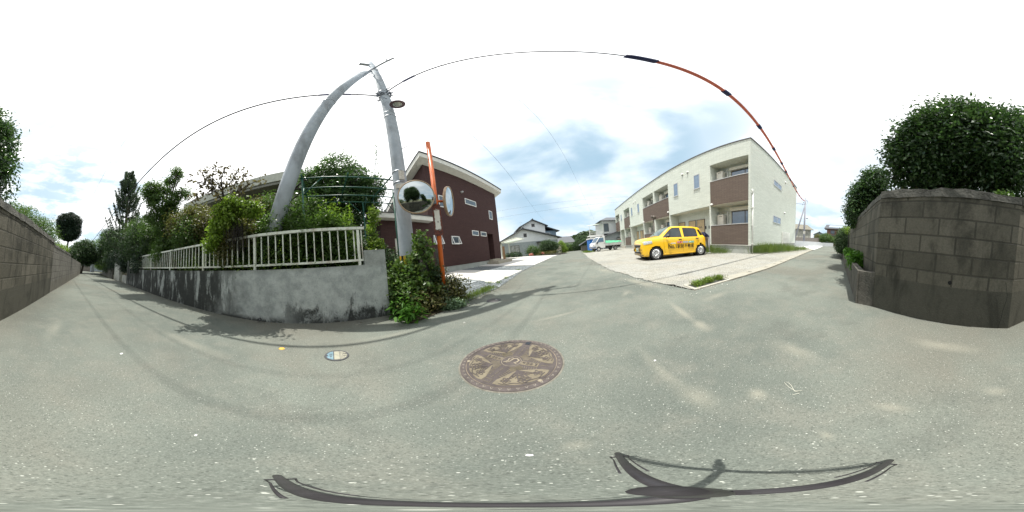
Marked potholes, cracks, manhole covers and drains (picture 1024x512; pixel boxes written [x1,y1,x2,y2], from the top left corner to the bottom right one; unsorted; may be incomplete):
manhole cover [458,340,565,393]
utility cover [324,350,349,361]
